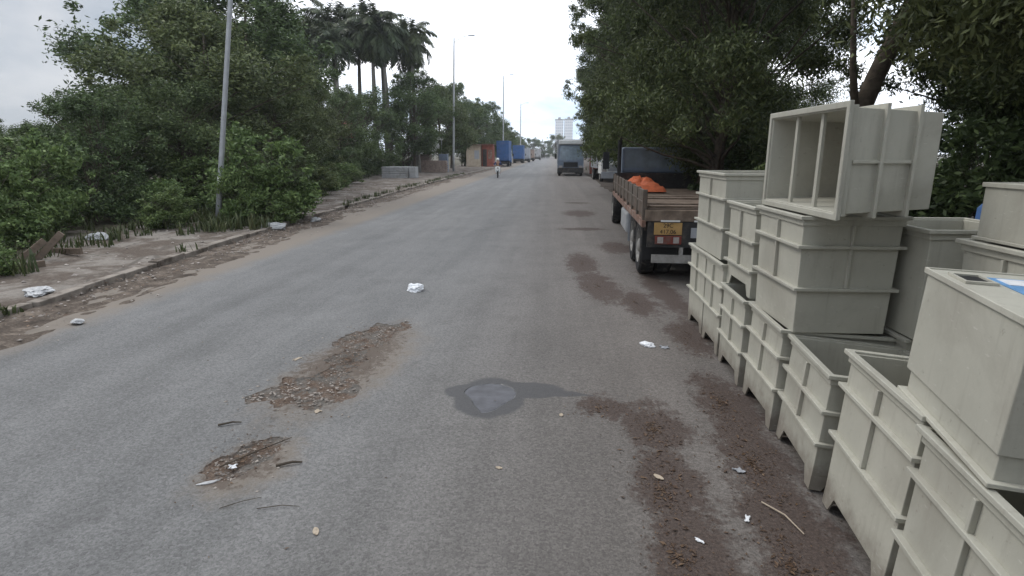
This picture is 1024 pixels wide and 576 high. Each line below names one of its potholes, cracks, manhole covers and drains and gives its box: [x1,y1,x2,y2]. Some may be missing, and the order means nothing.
pothole [245,321,412,411]
pothole [199,436,283,482]
